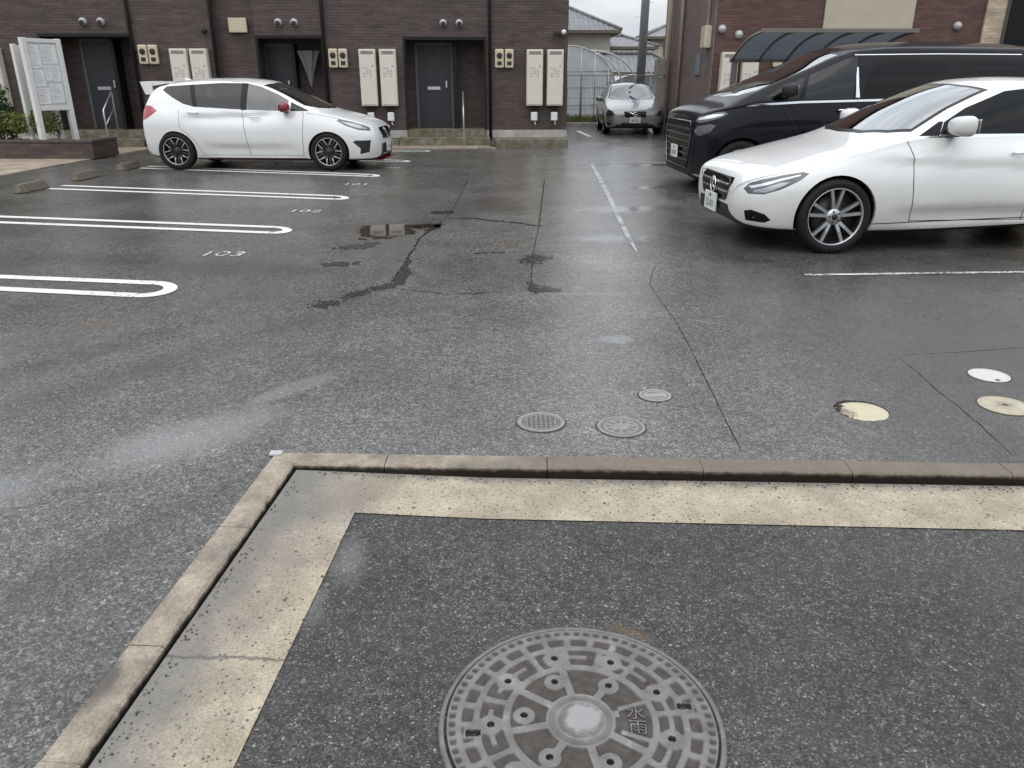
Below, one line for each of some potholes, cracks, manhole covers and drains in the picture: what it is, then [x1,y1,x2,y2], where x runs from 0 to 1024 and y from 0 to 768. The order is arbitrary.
manhole cover [595,416,647,438]
manhole cover [637,387,673,402]
manhole cover [966,368,1013,383]
crack [391,178,545,295]
manhole cover [438,627,727,768]
manhole cover [833,400,890,421]
manhole cover [975,396,1024,416]
